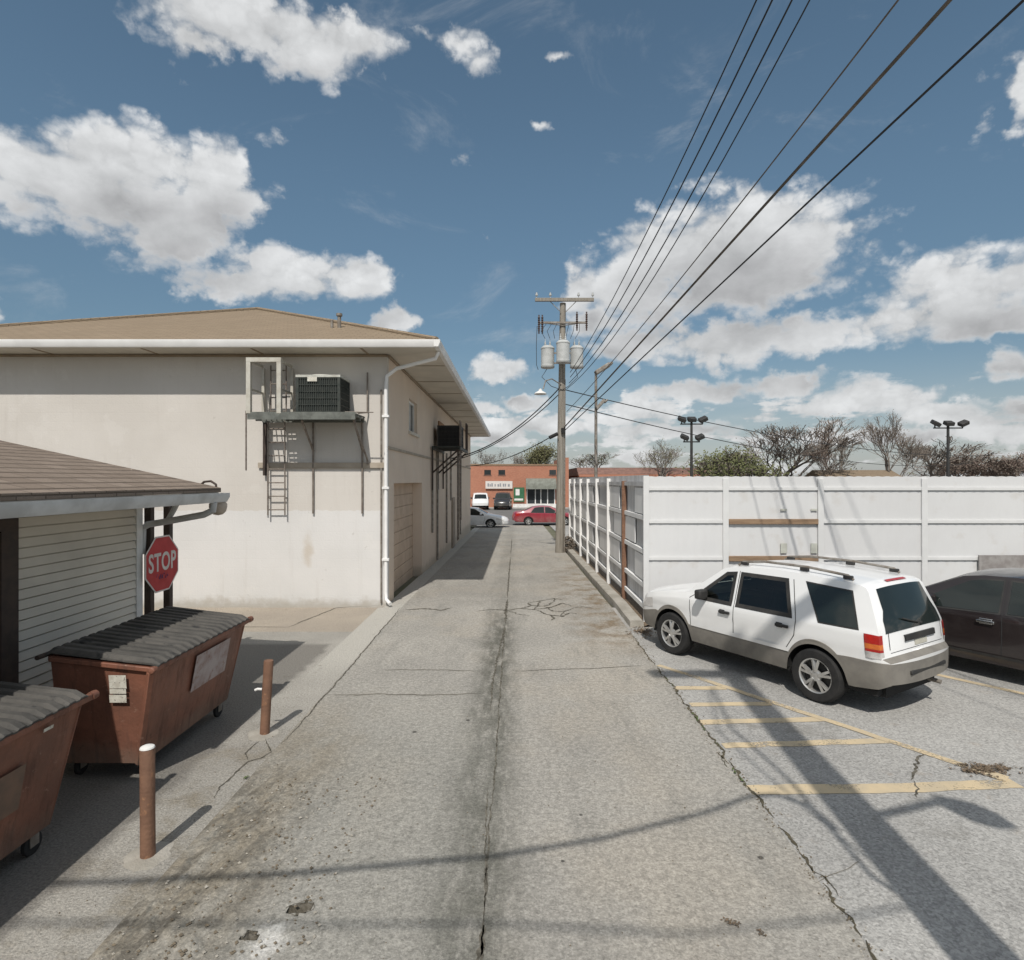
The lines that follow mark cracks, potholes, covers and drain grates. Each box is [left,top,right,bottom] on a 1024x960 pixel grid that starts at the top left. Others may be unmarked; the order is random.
crack [480,598,590,620]
crack [214,739,272,798]
crack [911,754,924,797]
pothole [241,930,259,941]
pothole [285,900,314,917]
